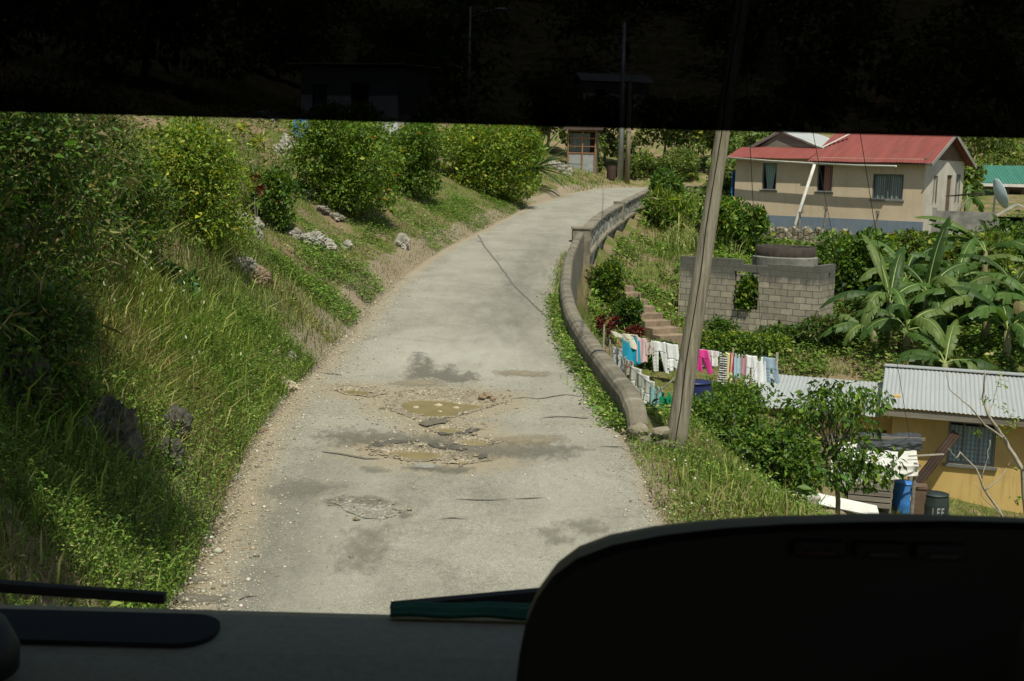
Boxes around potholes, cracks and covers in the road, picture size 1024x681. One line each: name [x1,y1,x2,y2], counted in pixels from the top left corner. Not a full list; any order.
pothole [419,419,482,436]
pothole [328,493,413,521]
pothole [431,453,491,466]
pothole [356,437,473,464]
pothole [446,432,501,449]
crack [323,451,379,459]
pothole [372,388,512,421]
pothole [331,384,388,398]
